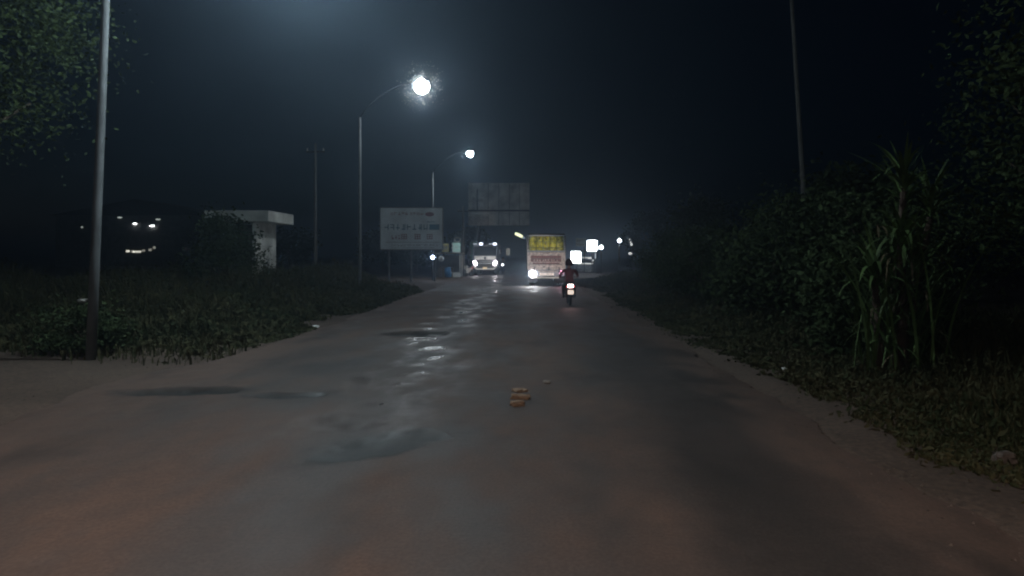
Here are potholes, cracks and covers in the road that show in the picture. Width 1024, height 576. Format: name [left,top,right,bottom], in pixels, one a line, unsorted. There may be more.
pothole [107,386,258,396]
pothole [239,392,335,400]
